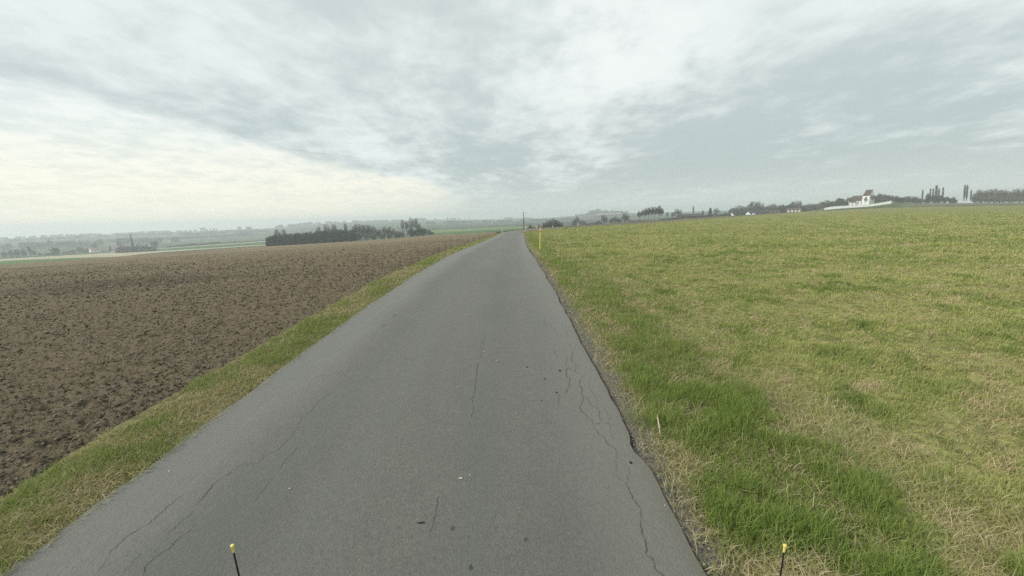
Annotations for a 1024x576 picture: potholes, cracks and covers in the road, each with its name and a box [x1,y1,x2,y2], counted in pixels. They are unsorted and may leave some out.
crack [543,320,617,458]
crack [616,470,664,576]
crack [100,394,330,575]
